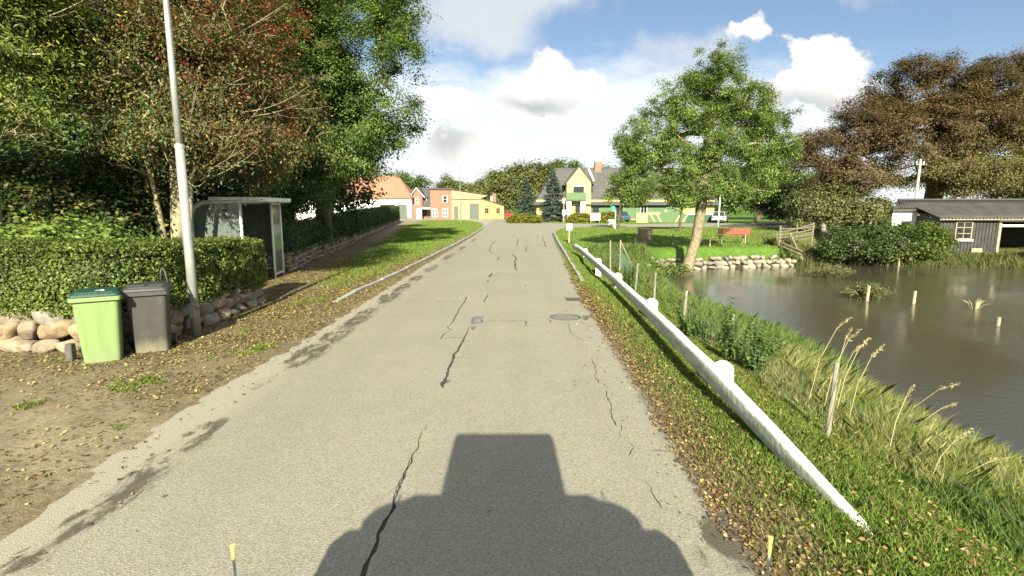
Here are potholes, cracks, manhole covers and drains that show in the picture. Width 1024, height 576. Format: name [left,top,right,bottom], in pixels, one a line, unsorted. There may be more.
crack [549,320,644,456]
crack [440,297,469,388]
crack [484,236,546,277]
crack [360,425,427,576]
